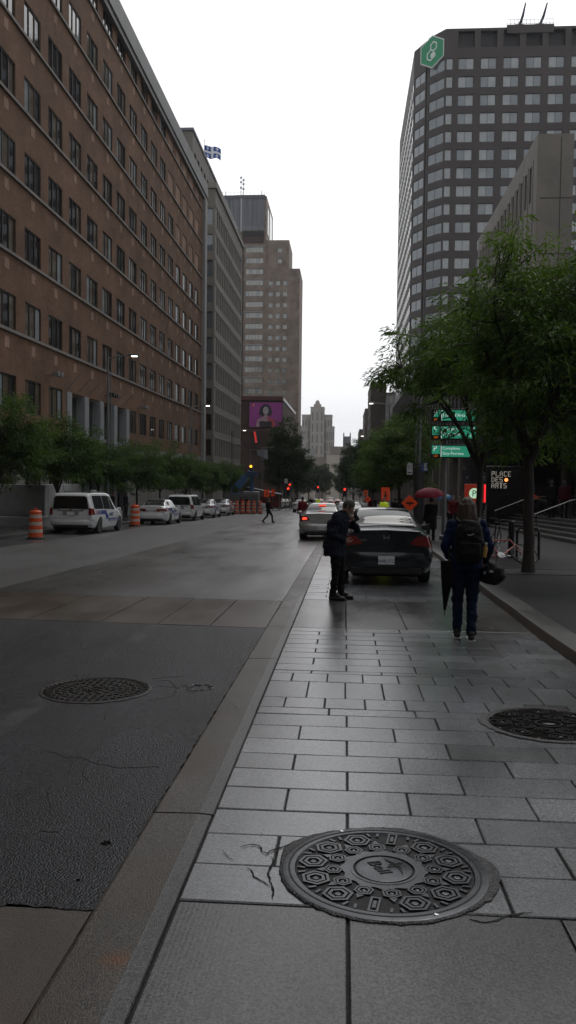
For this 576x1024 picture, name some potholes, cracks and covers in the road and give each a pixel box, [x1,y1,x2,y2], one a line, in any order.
manhole cover [279,827,501,925]
crack [223,843,290,898]
crack [469,912,531,923]
crack [46,750,156,782]
crack [153,676,193,700]
manhole cover [478,707,576,743]
manhole cover [38,677,152,704]
